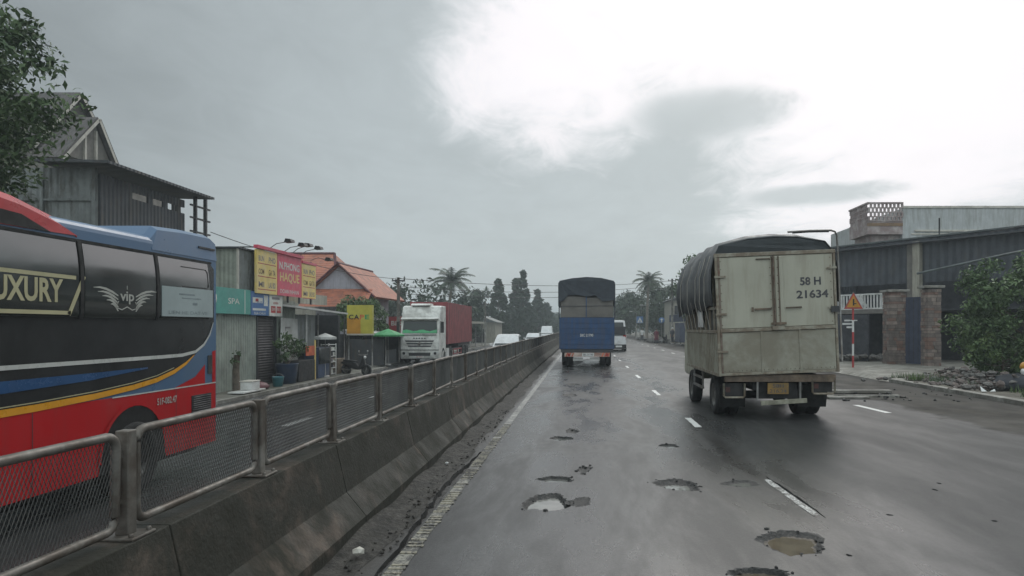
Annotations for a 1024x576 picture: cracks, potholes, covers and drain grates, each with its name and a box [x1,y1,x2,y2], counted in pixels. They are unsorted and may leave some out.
pothole [563,497,591,507]
pothole [725,566,794,576]
pothole [721,478,760,487]
pothole [521,493,575,511]
pothole [647,478,703,492]
pothole [754,527,825,556]
pothole [574,464,593,475]
